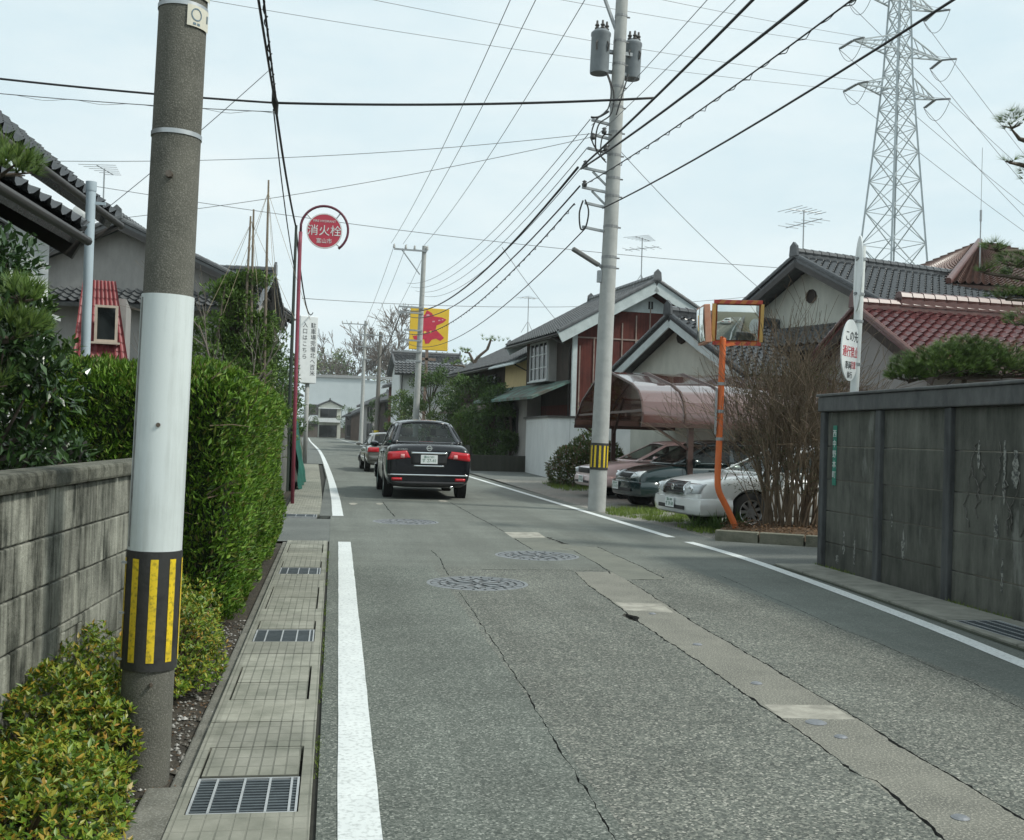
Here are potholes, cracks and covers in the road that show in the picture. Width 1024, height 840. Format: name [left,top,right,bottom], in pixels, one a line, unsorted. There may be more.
drain grate [252,629,315,642]
manhole cover [427,576,528,591]
drain grate [954,620,1024,642]
manhole cover [495,551,579,561]
drain grate [185,776,300,815]
